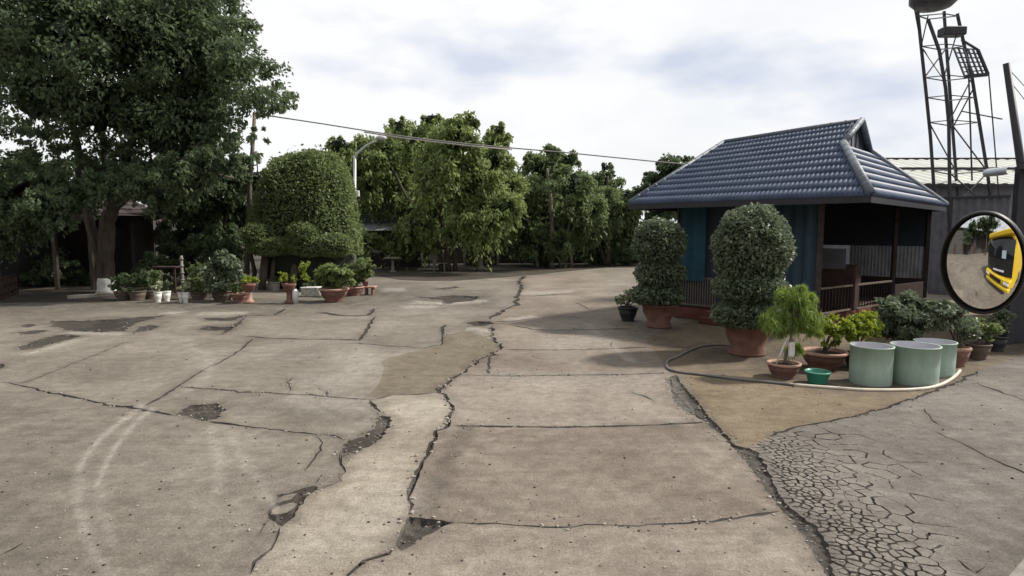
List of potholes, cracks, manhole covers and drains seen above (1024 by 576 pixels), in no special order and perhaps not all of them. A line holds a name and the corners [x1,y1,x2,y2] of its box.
pothole [412,295,479,305]
pothole [48,315,165,333]
pothole [175,403,227,422]
pothole [17,334,82,350]
pothole [381,516,454,551]
crack [752,371,1024,576]
crack [4,276,595,576]
pothole [199,318,244,334]
pothole [247,451,346,574]
